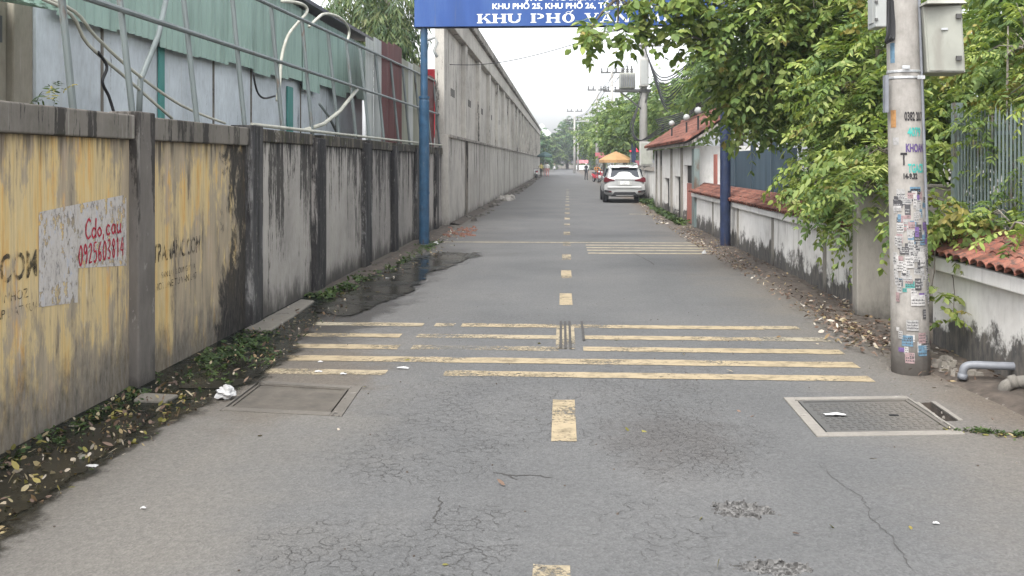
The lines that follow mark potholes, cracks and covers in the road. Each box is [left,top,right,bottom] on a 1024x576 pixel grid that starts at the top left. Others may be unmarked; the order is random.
crack [238,370,562,576]
pothole [729,558,813,576]
pothole [710,499,781,520]
manhole cover [219,380,362,417]
crack [819,464,911,568]
